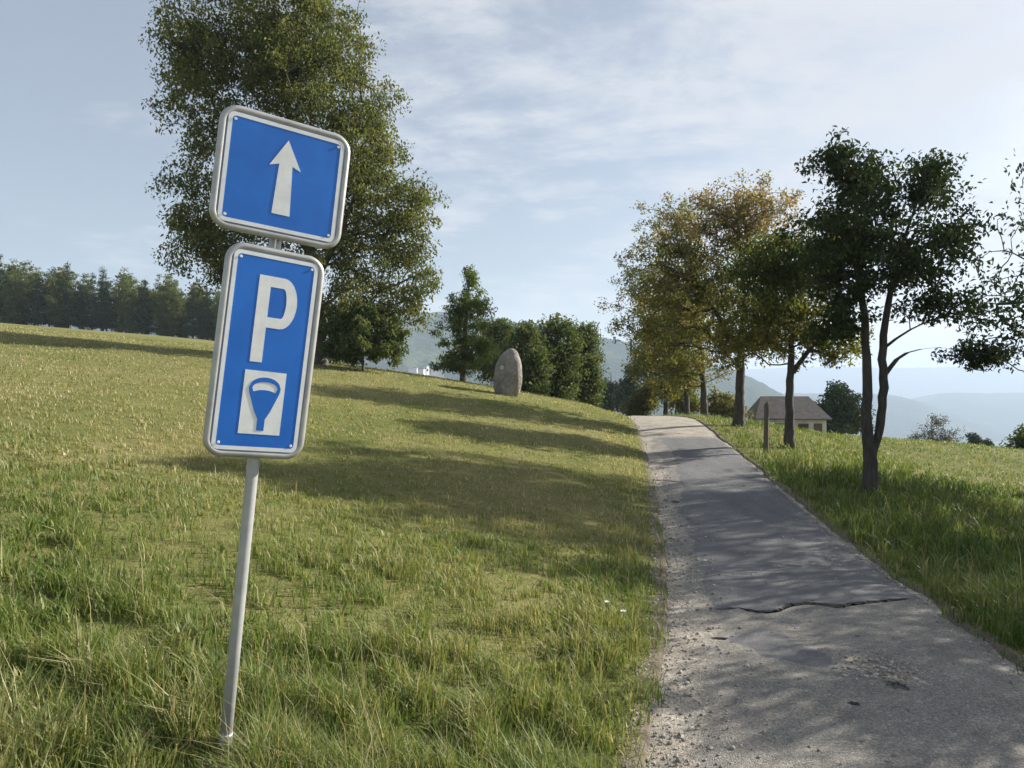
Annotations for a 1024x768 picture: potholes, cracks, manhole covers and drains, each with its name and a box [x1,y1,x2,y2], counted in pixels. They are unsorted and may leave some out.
pothole [882,680,910,691]
